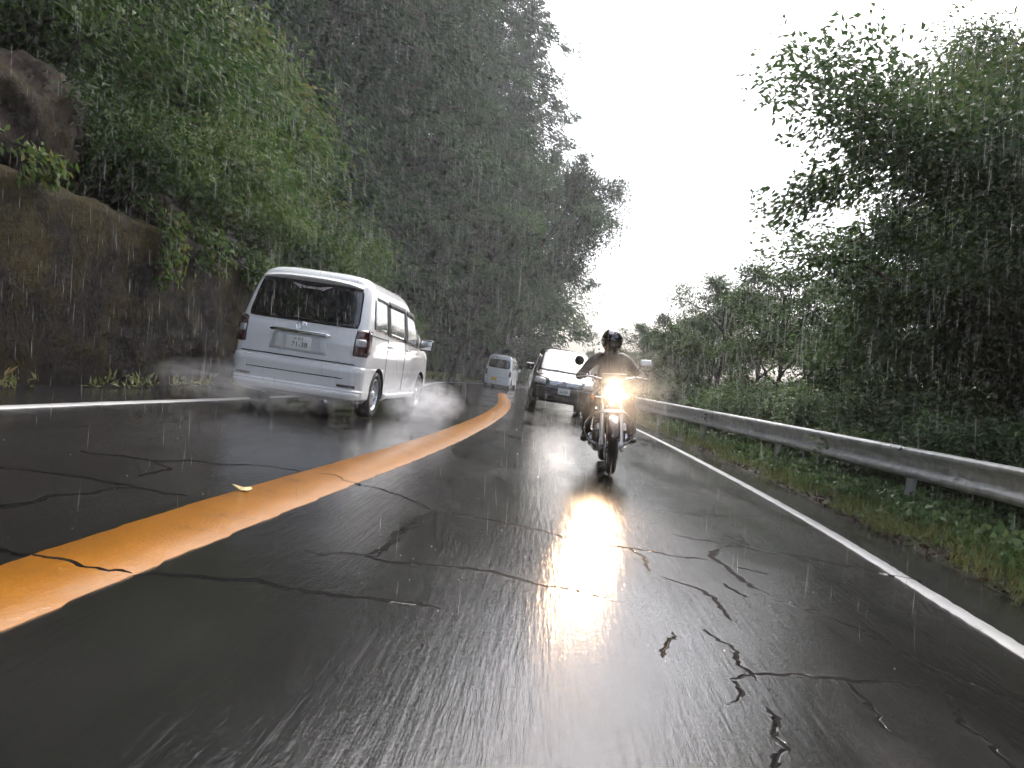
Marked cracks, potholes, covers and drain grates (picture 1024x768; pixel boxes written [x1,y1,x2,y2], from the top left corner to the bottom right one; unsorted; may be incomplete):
crack [0,451,1024,768]
